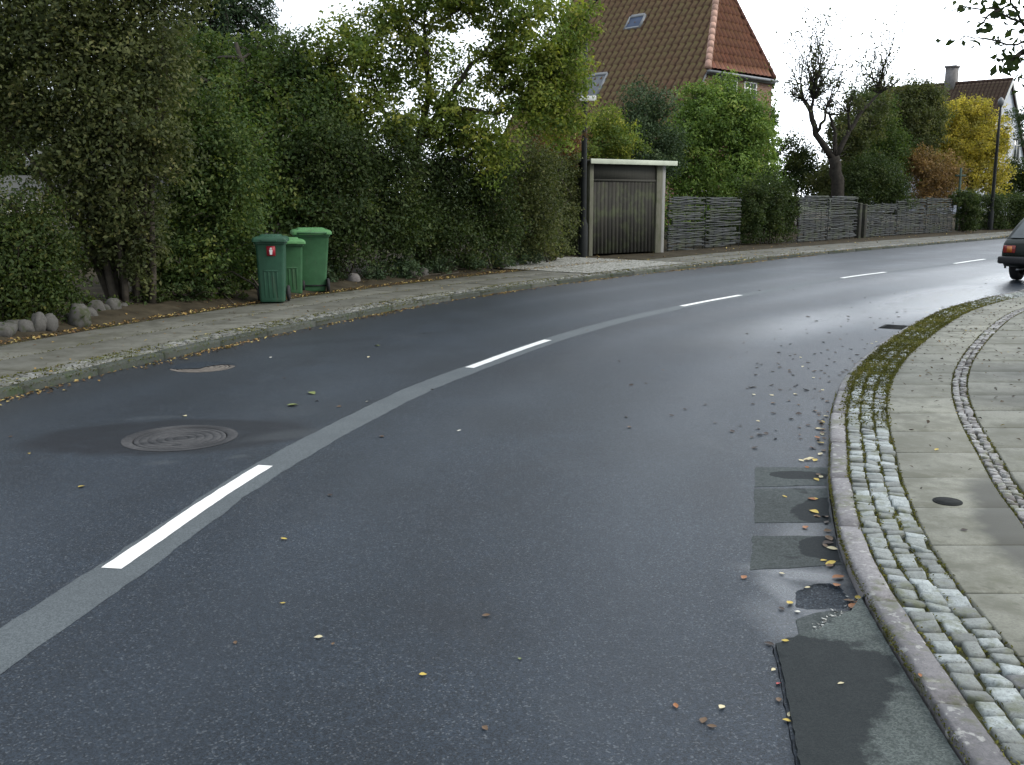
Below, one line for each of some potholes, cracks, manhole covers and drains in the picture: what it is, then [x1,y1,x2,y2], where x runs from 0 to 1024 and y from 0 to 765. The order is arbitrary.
utility cover [932,497,963,506]
pothole [795,583,850,610]
manhole cover [121,425,238,452]
